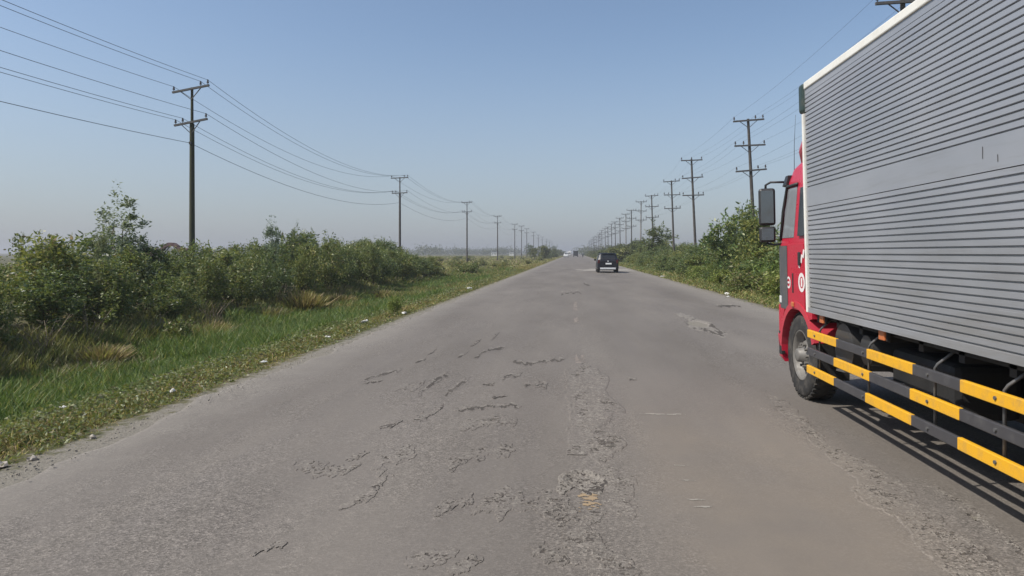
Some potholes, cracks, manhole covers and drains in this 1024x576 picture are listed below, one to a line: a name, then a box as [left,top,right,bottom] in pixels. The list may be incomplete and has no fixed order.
pothole [556,468,609,495]
pothole [676,312,727,338]
crack [292,332,643,576]
